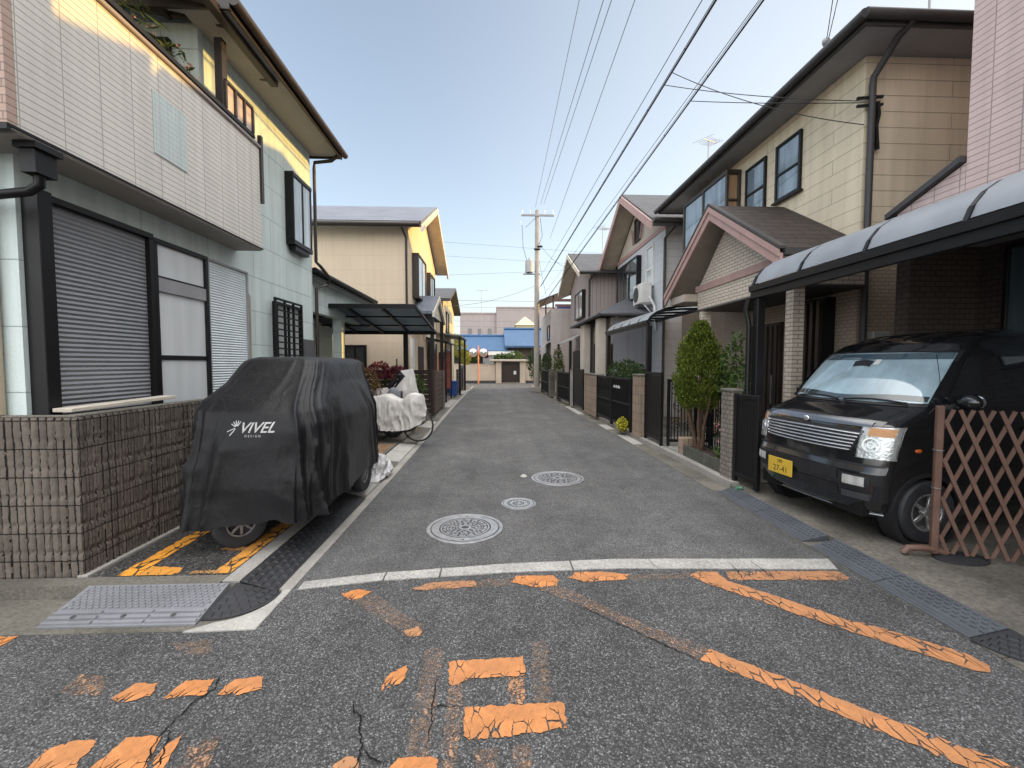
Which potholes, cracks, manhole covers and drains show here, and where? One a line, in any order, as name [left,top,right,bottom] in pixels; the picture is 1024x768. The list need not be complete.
manhole cover [426,514,503,544]
manhole cover [501,498,536,510]
crack [428,681,465,742]
crack [143,674,221,768]
manhole cover [531,471,584,486]
crack [353,702,392,768]
